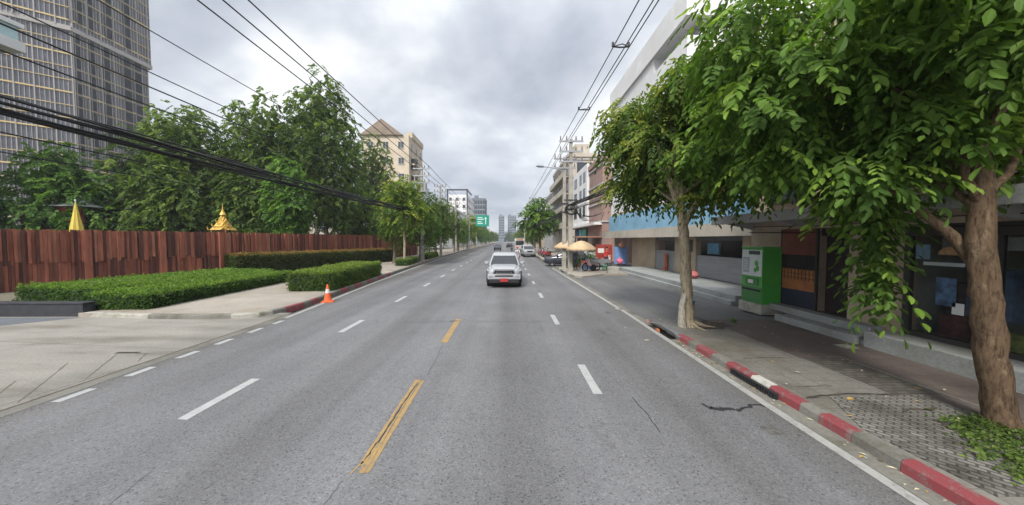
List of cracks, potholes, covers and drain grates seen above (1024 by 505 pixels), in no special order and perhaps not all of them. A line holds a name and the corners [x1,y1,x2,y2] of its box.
drain grate [729,368,778,400]
crack [590,348,660,432]
